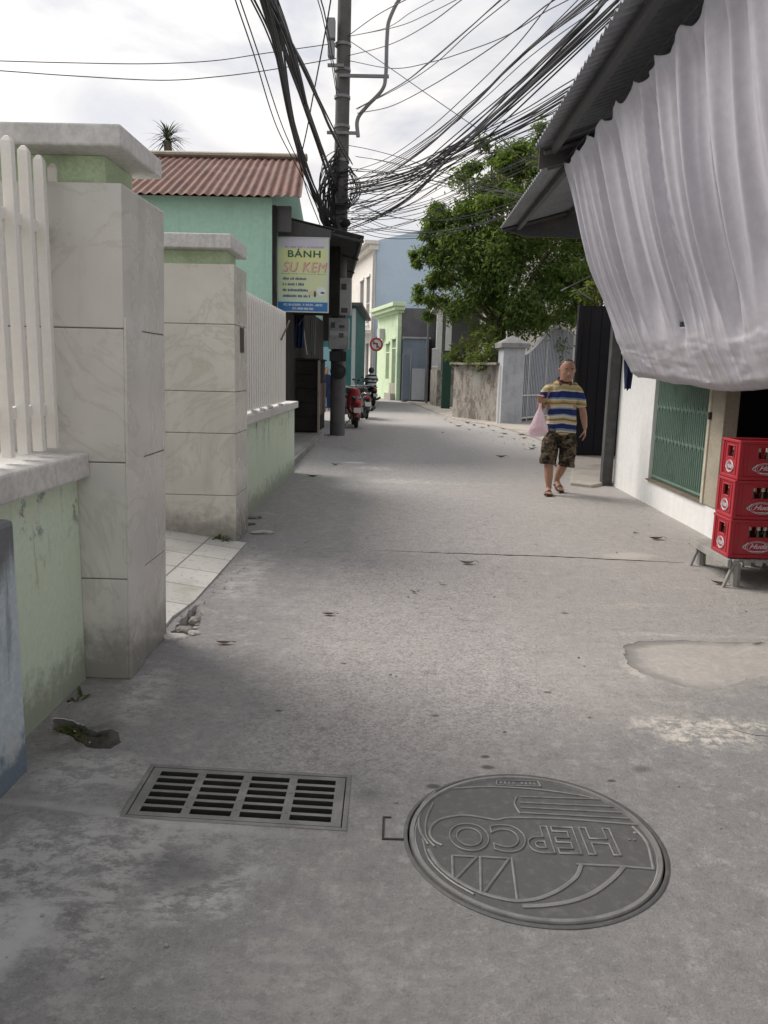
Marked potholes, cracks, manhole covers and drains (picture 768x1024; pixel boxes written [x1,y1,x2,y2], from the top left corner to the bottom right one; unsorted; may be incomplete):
manhole cover [382,774,670,930]
pothole [52,718,121,749]
drain grate [119,764,352,831]
pothole [171,605,204,633]
